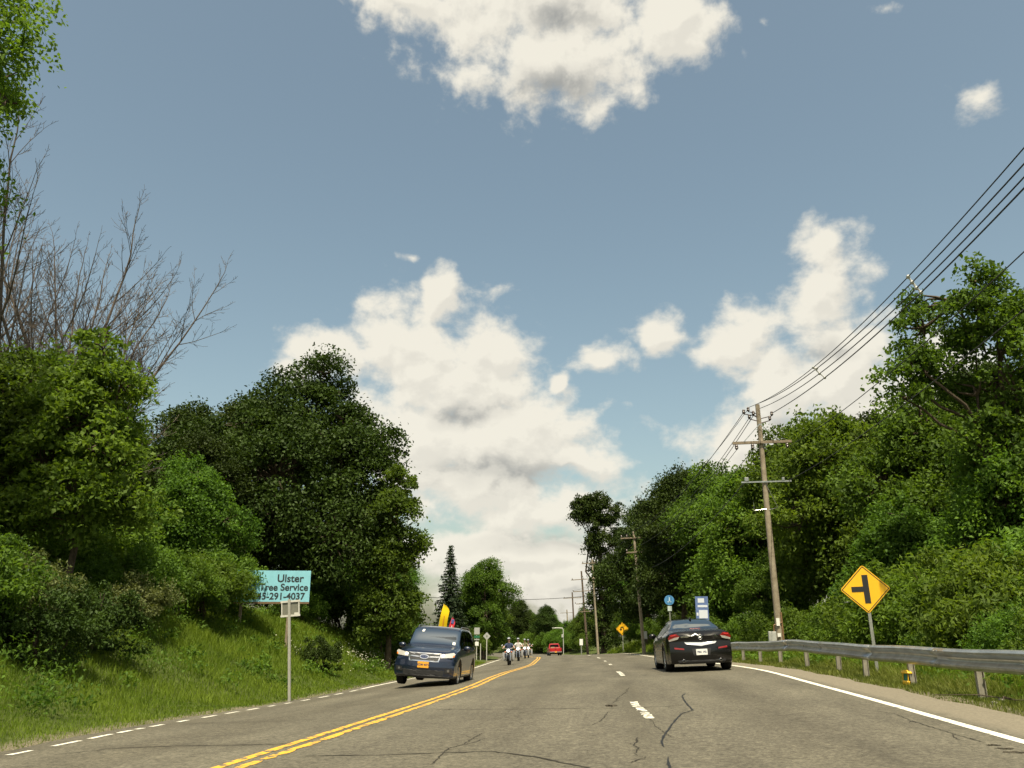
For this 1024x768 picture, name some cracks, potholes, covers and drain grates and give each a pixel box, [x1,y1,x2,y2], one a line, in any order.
crack [312,732,590,768]
crack [433,687,679,763]
